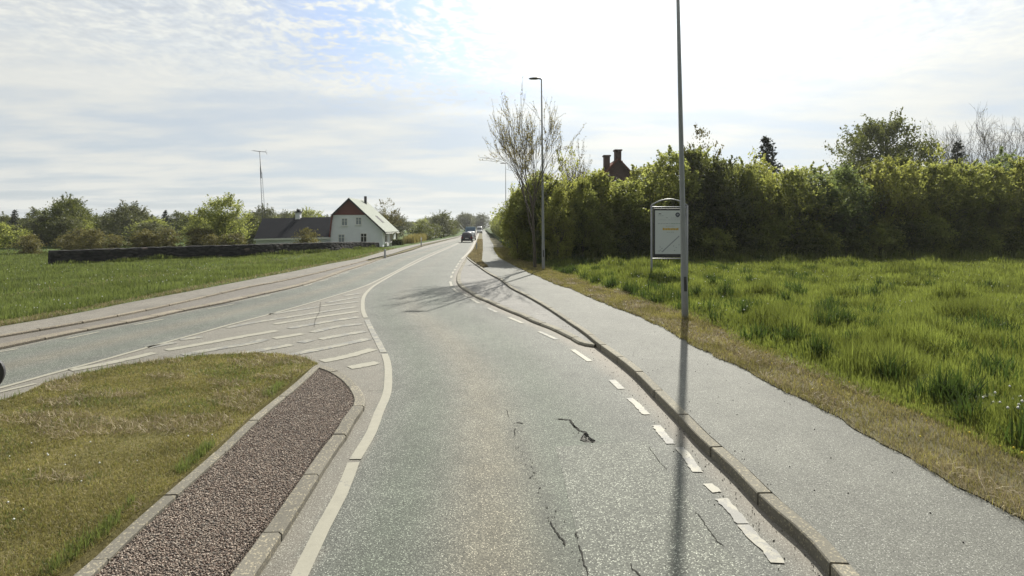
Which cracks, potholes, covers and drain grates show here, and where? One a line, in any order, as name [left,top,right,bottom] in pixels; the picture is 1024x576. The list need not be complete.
crack [559,418,595,442]
crack [507,411,588,576]
